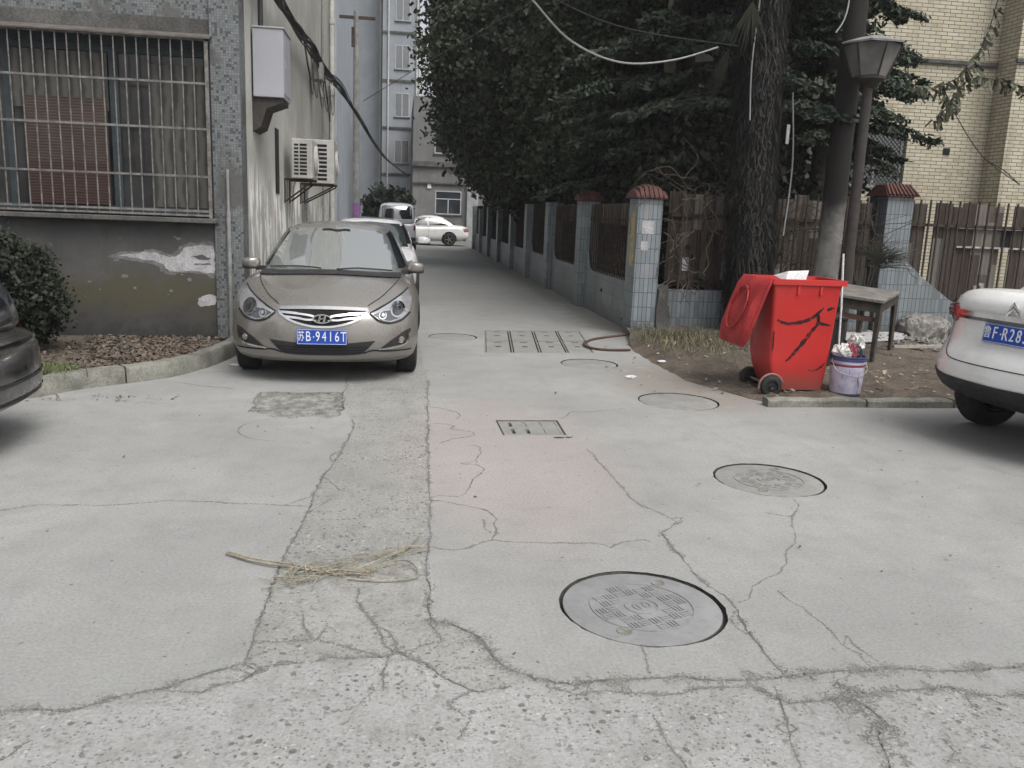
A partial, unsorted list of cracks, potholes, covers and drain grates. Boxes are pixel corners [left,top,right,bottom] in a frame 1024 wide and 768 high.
manhole cover [638,393,720,411]
manhole cover [559,571,728,648]
crack [0,587,512,740]
crack [754,685,962,768]
crack [428,406,651,550]
crack [652,712,688,768]
manhole cover [560,359,618,369]
crack [0,740,33,761]
manhole cover [713,463,827,497]
crack [738,499,893,668]
crack [0,496,312,511]
